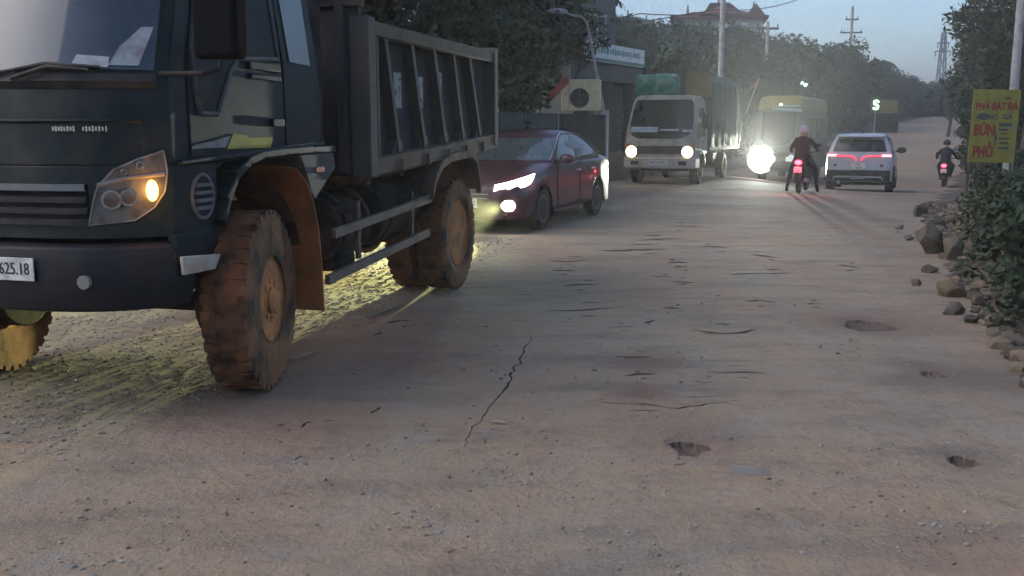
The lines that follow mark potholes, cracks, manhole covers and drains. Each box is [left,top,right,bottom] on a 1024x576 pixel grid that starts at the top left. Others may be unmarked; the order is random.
pothole [918,369,952,379]
crack [597,365,766,411]
pothole [835,317,909,333]
pothole [945,452,988,469]
pothole [663,436,718,458]
crack [692,323,755,334]
crack [617,356,656,379]
crack [458,333,534,462]
